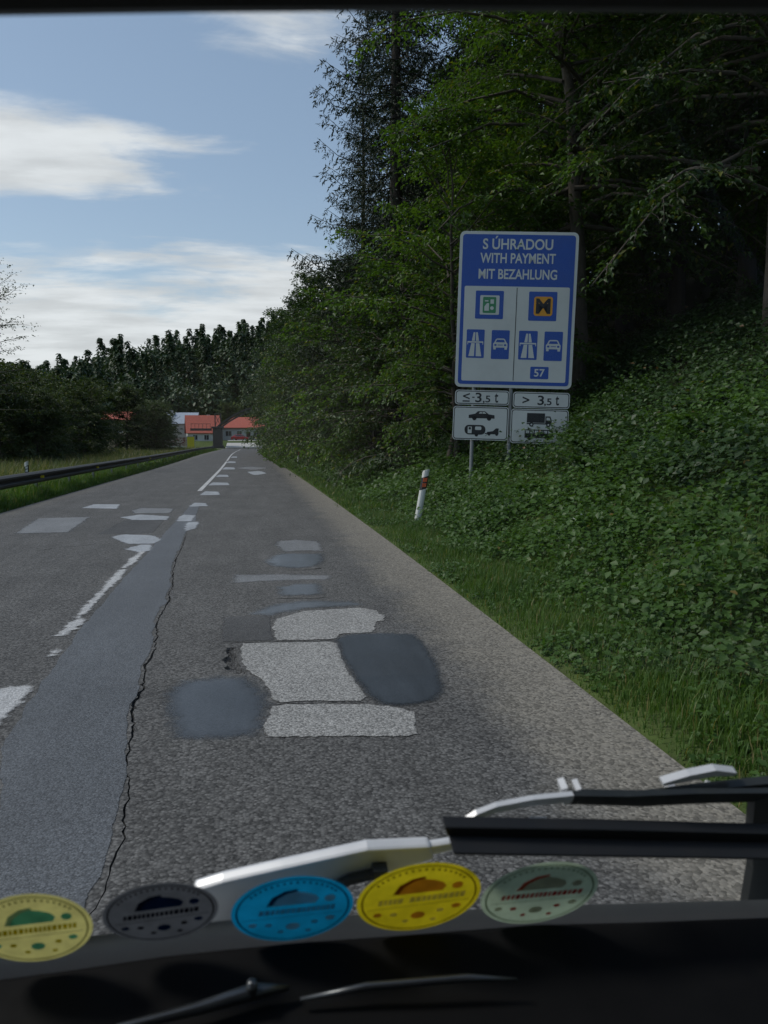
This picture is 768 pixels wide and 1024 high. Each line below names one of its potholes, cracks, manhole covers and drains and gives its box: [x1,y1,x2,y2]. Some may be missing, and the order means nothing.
pothole [222,647,247,674]
crack [89,535,186,915]
